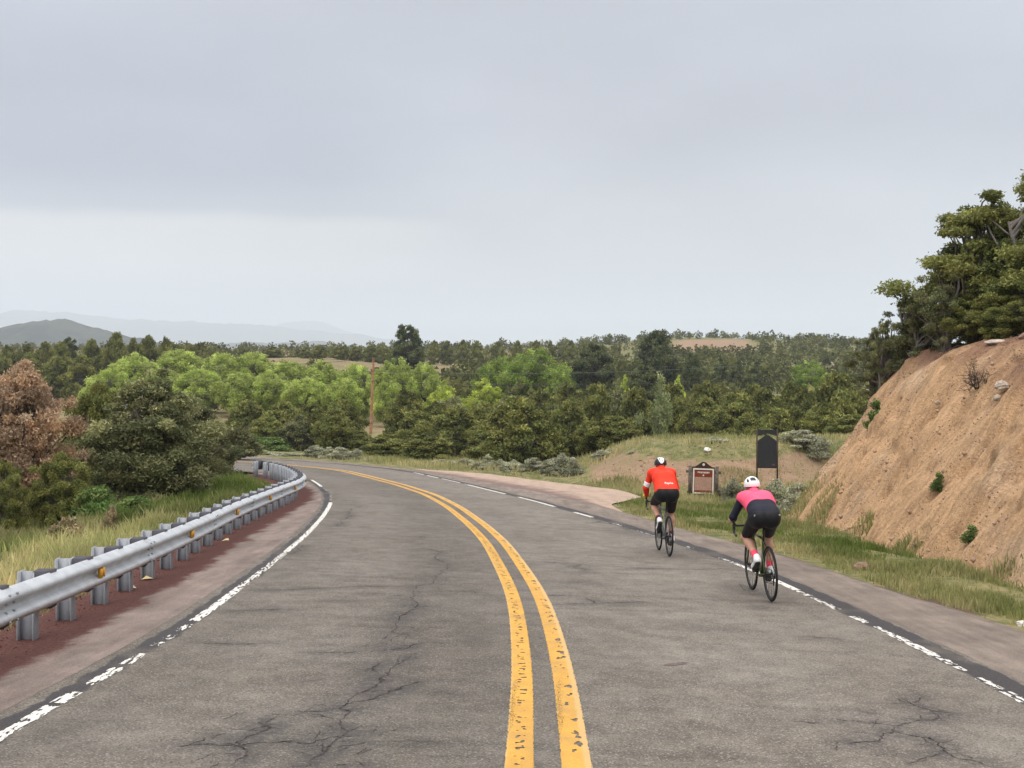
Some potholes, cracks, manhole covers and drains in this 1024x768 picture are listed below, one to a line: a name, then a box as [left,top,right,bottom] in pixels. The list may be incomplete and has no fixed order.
crack [183,551,480,768]
crack [794,696,985,765]
